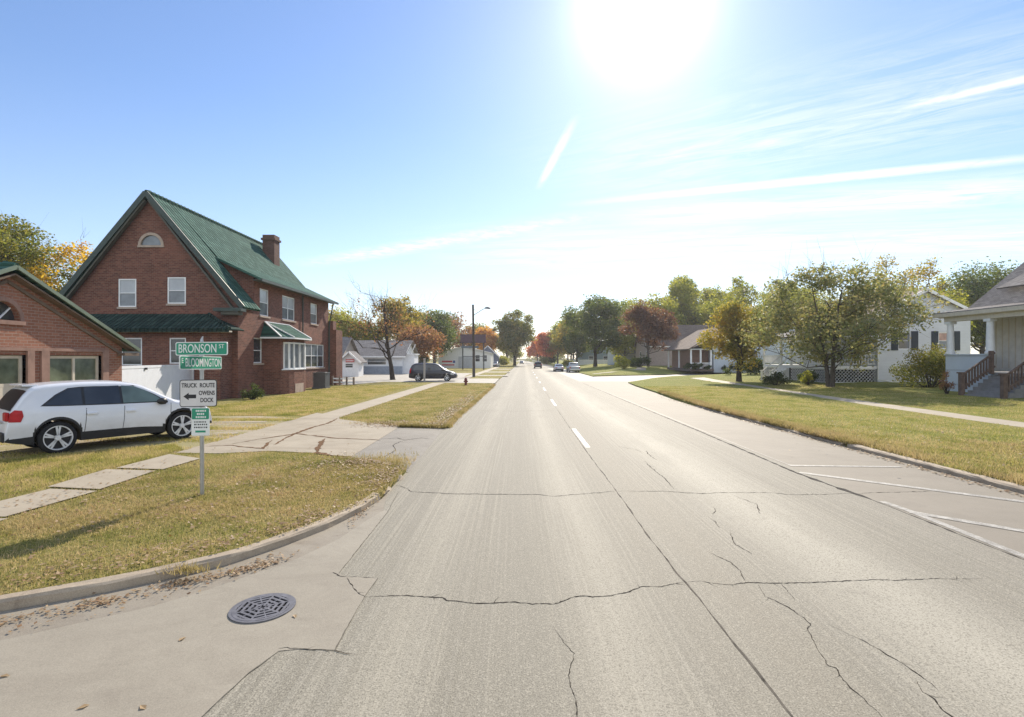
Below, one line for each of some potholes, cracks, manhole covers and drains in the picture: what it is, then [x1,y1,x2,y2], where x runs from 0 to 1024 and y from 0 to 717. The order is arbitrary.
crack [221,433,428,456]
crack [635,449,980,715]
crack [553,626,578,715]
crack [370,582,684,604]
